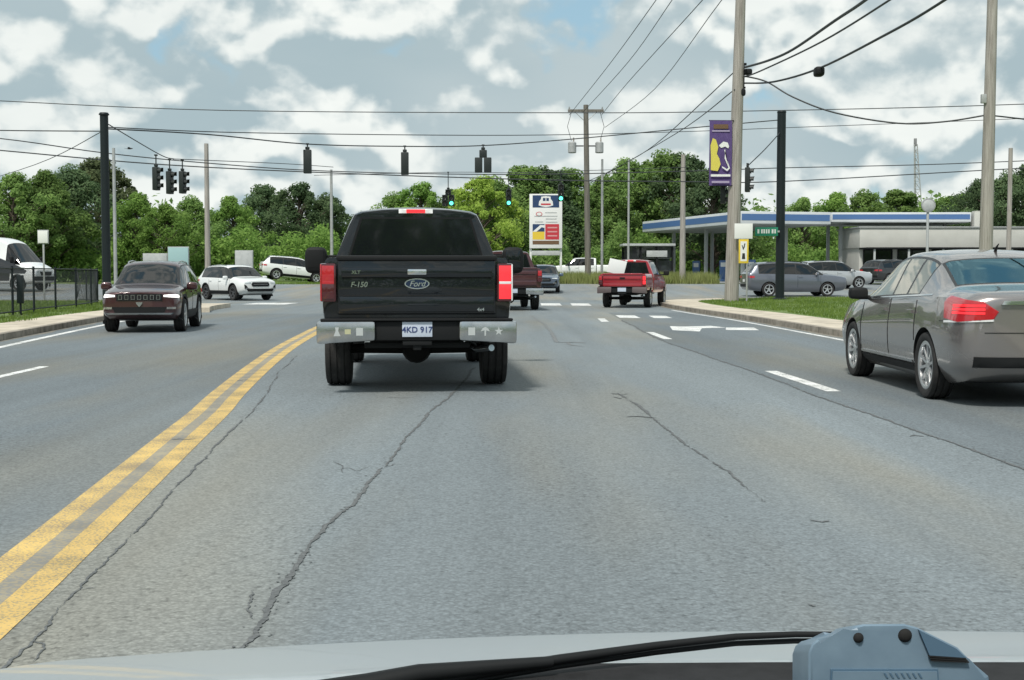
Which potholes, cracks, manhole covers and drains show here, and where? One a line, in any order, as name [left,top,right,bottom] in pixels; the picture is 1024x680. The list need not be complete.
crack [611,393,764,501]
crack [1,357,476,669]
